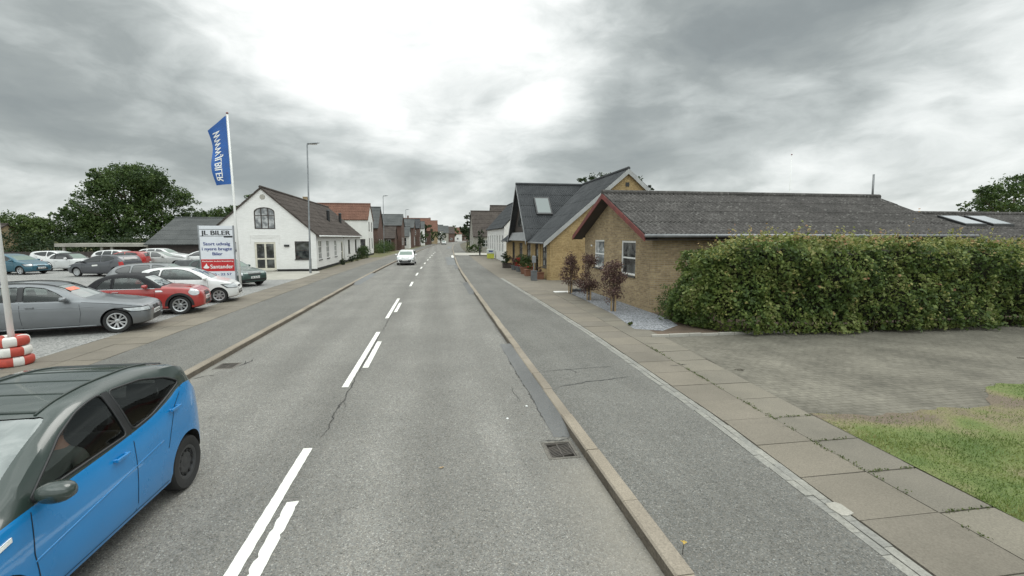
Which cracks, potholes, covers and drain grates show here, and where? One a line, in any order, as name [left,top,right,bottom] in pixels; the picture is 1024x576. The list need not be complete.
crack [321,316,391,437]
crack [505,353,624,417]
drain grate [540,440,581,460]
